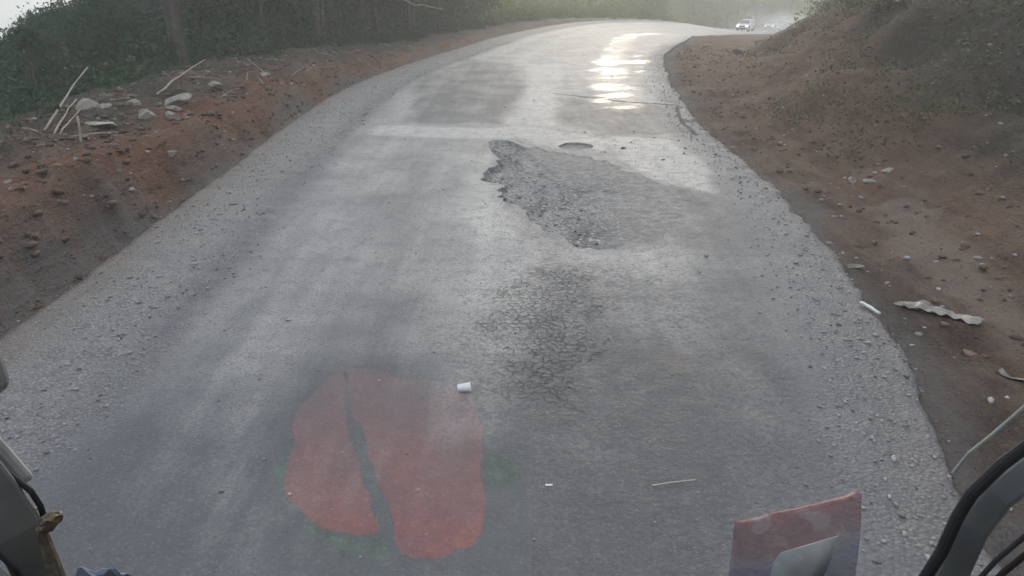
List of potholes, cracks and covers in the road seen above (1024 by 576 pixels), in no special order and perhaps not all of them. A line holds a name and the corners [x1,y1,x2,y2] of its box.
pothole [473,139,698,255]
crack [554,93,697,135]
crack [476,268,619,416]
